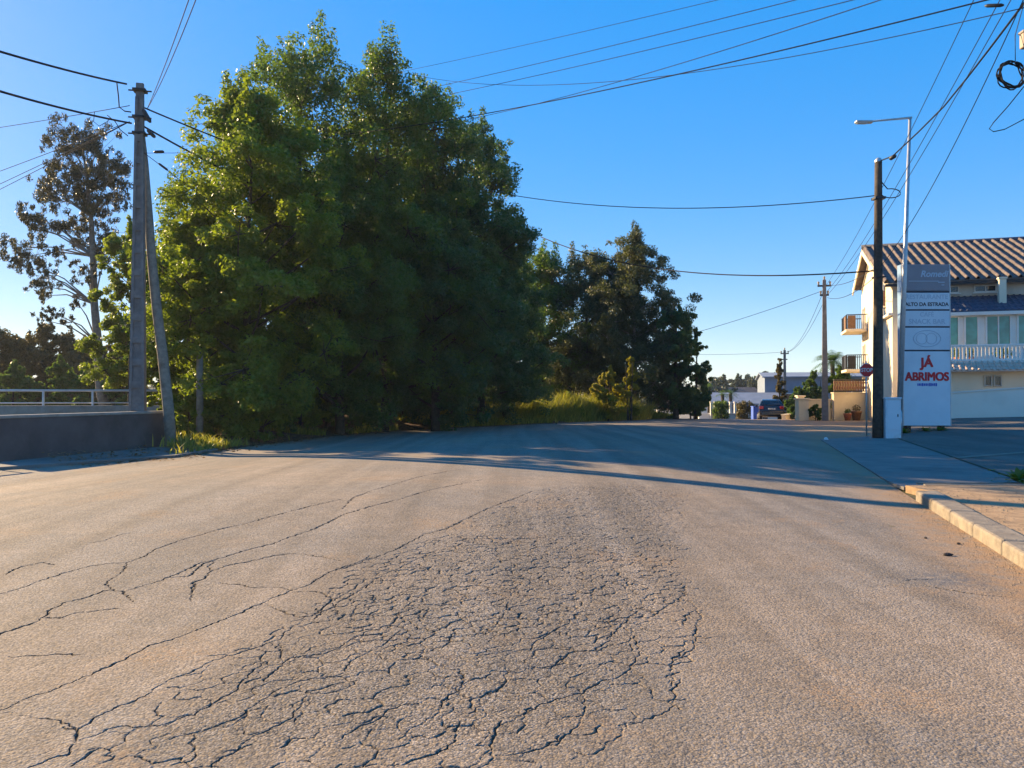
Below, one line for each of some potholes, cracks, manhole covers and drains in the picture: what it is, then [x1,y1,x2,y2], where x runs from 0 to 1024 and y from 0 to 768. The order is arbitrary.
crack [0,469,708,768]
